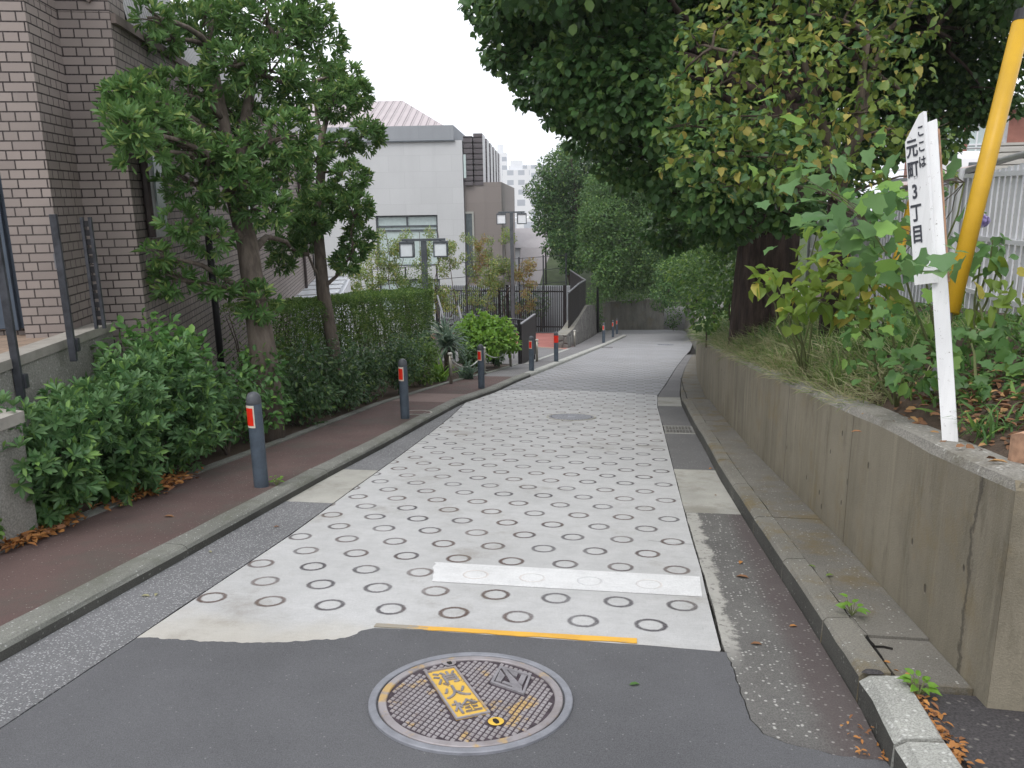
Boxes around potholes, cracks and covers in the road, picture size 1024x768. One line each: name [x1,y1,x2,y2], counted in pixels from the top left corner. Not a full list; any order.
manhole cover [546,413,597,421]
drain grate [663,425,695,433]
manhole cover [368,652,573,756]
